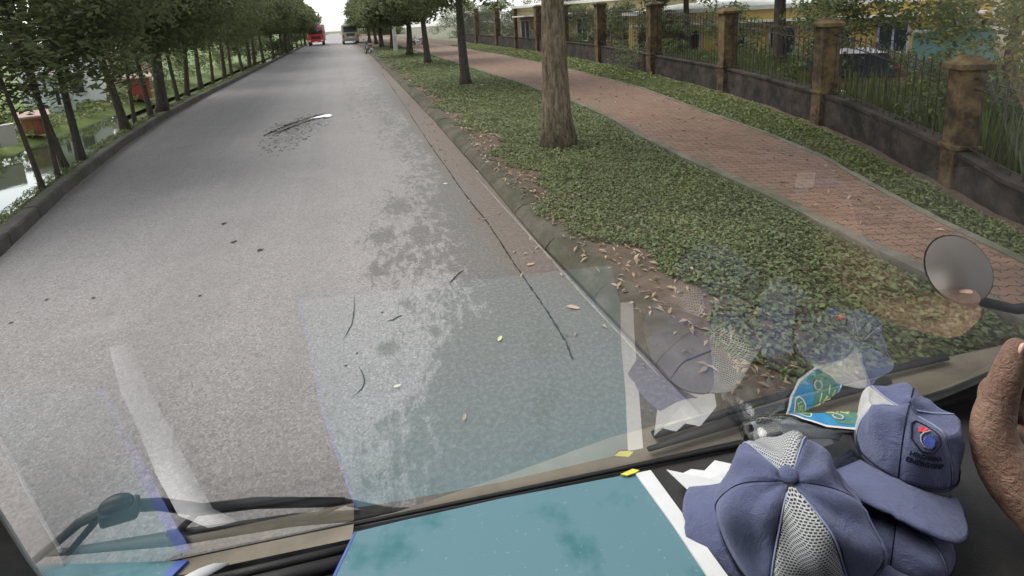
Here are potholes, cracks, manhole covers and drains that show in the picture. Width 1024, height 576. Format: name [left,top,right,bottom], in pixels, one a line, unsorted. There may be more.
pothole [256,113,333,157]
